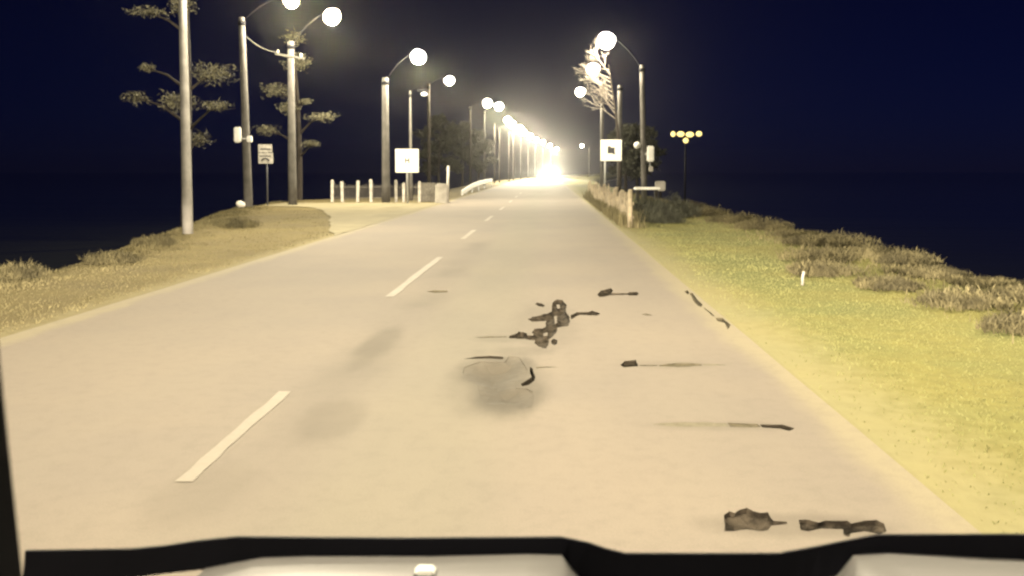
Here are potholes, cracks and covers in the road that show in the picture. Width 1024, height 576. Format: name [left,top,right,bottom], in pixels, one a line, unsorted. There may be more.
pothole [509,299,570,348]
pothole [463,356,533,409]
crack [654,422,794,431]
pothole [724,508,787,531]
crack [684,290,730,329]
pothole [799,520,886,537]
